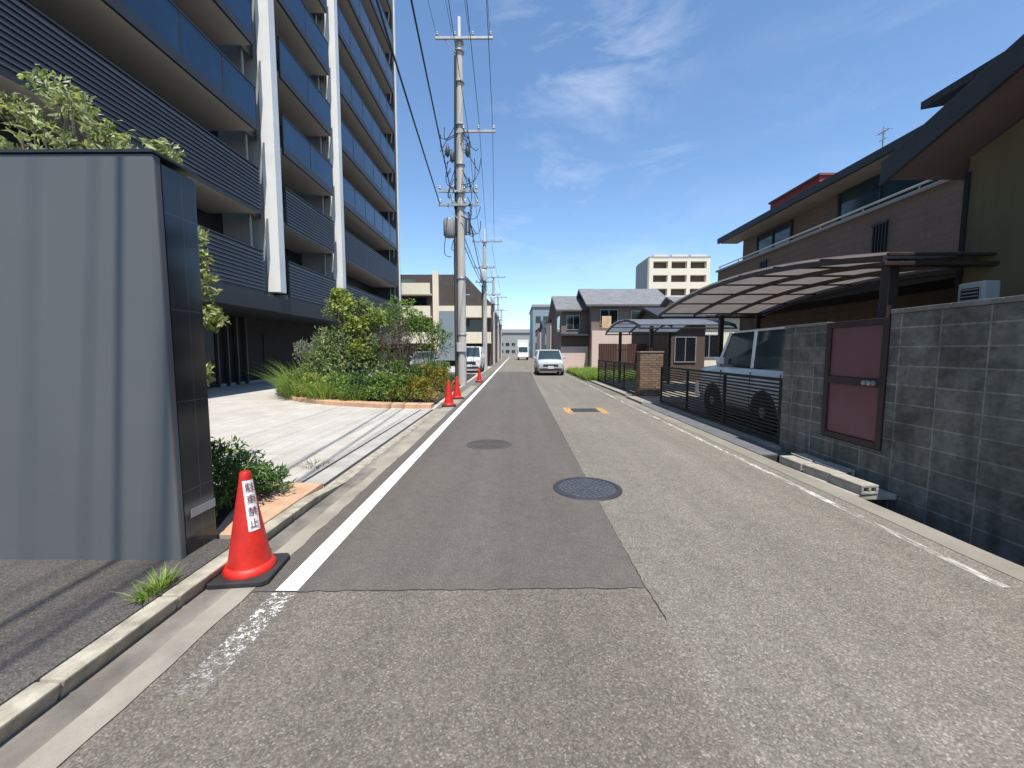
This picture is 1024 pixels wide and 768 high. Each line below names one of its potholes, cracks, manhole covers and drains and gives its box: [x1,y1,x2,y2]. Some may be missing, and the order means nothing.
manhole cover [466,439,512,450]
manhole cover [553,477,623,501]
